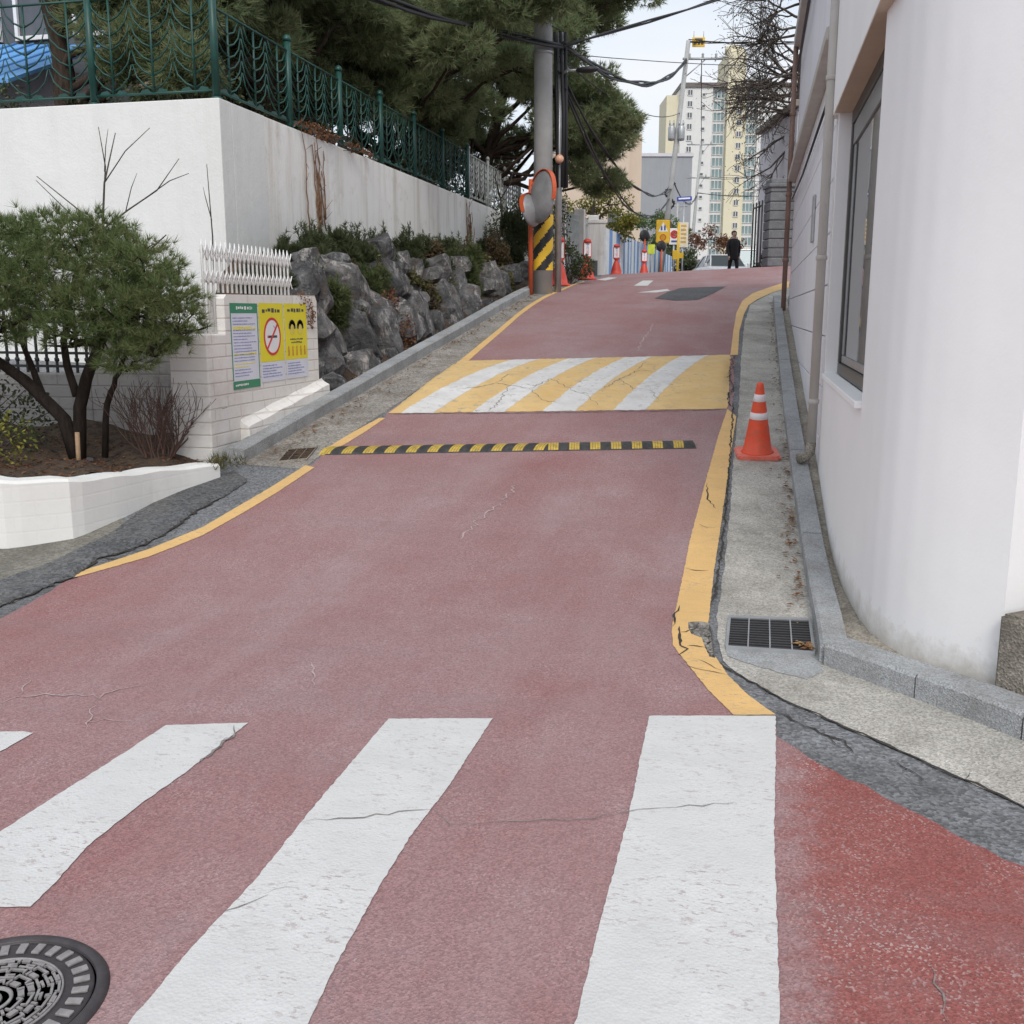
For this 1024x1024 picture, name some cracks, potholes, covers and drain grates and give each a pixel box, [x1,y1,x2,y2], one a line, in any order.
manhole cover [0,935,110,1024]
crack [931,965,949,1023]
crack [303,802,733,824]
crack [672,605,723,674]
crack [4,676,144,729]
drain grate [277,446,318,463]
drain grate [725,615,816,656]
crack [199,726,235,762]
